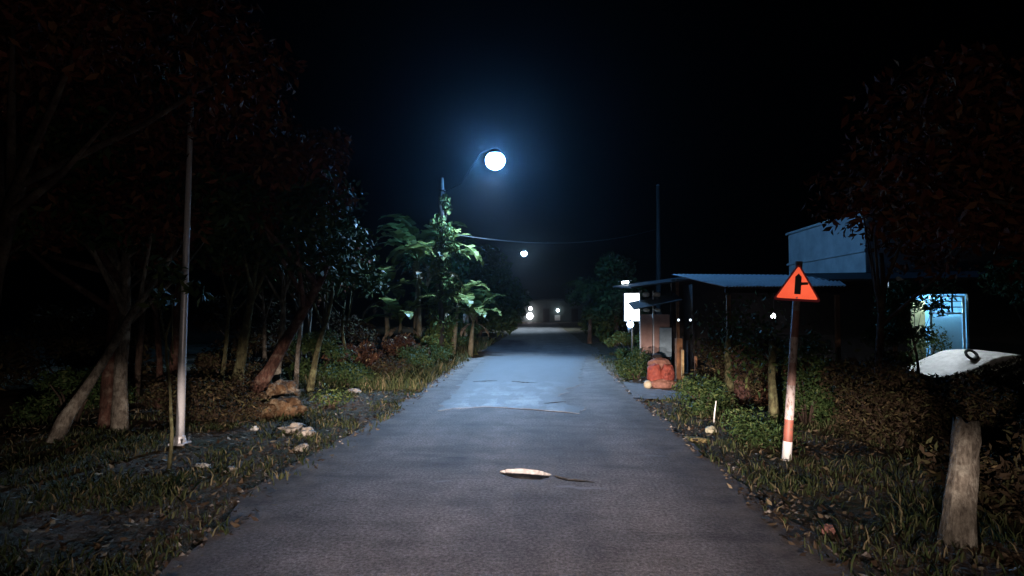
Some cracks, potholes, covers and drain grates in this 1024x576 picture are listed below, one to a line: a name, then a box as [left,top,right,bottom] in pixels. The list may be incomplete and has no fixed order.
crack [553,475,595,483]
pothole [500,469,552,480]
